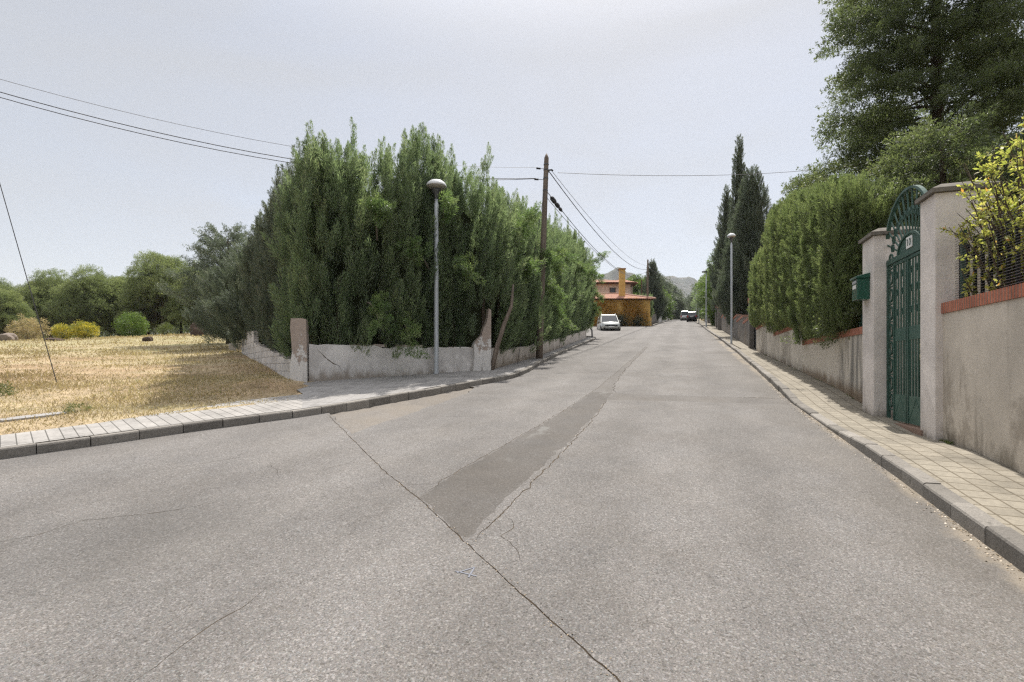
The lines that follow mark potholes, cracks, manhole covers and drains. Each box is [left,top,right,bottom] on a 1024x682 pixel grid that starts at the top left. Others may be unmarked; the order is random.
crack [139,589,265,678]
crack [430,346,646,558]
